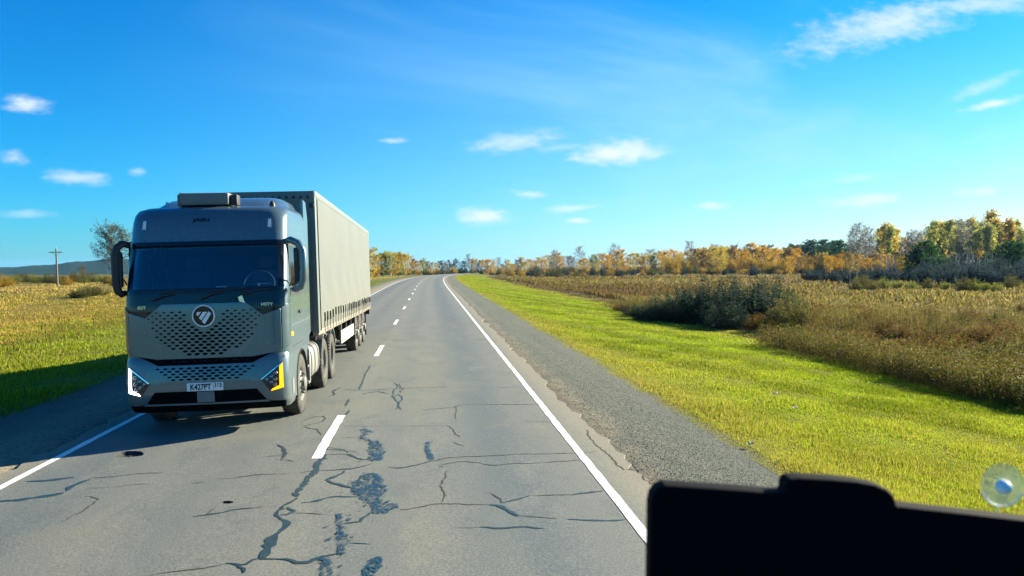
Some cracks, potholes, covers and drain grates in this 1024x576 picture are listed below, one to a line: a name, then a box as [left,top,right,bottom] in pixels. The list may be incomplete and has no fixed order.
crack [0,472,161,522]
crack [440,466,448,502]
crack [587,430,651,484]
crack [198,506,269,516]
crack [328,383,434,409]
crack [426,404,518,446]
crack [199,445,294,483]
